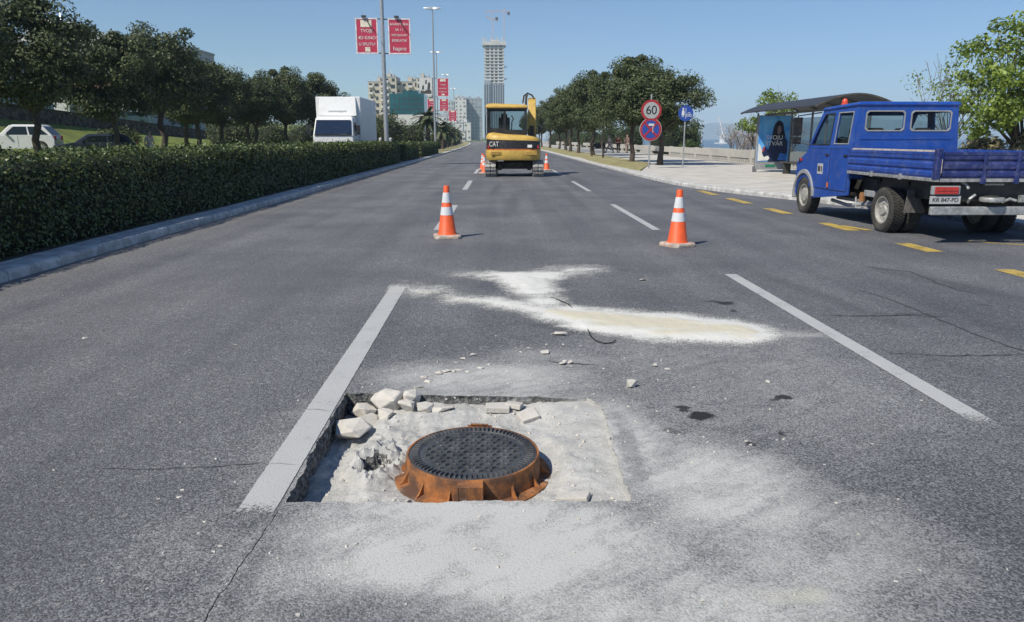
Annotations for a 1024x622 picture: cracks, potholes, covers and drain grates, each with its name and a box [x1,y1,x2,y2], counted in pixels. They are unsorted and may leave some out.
manhole cover [395,423,551,503]
crack [837,290,1024,356]
pothole [286,393,632,503]
crack [204,508,280,622]
crack [100,462,297,470]
crack [869,266,997,306]
